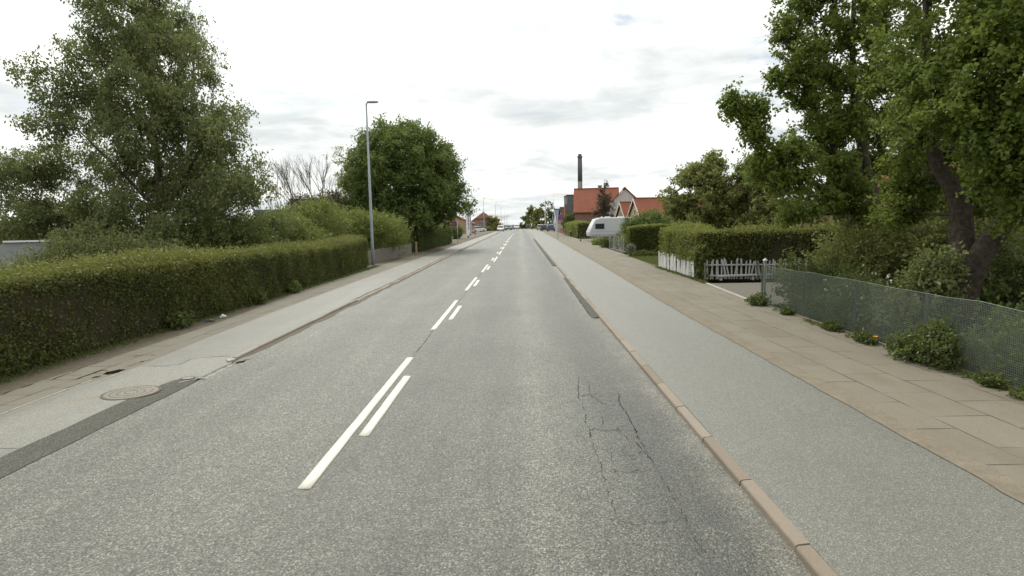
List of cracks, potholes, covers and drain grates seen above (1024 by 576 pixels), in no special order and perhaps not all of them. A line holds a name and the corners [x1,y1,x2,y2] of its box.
manhole cover [100,385,162,400]
crack [577,379,701,548]
